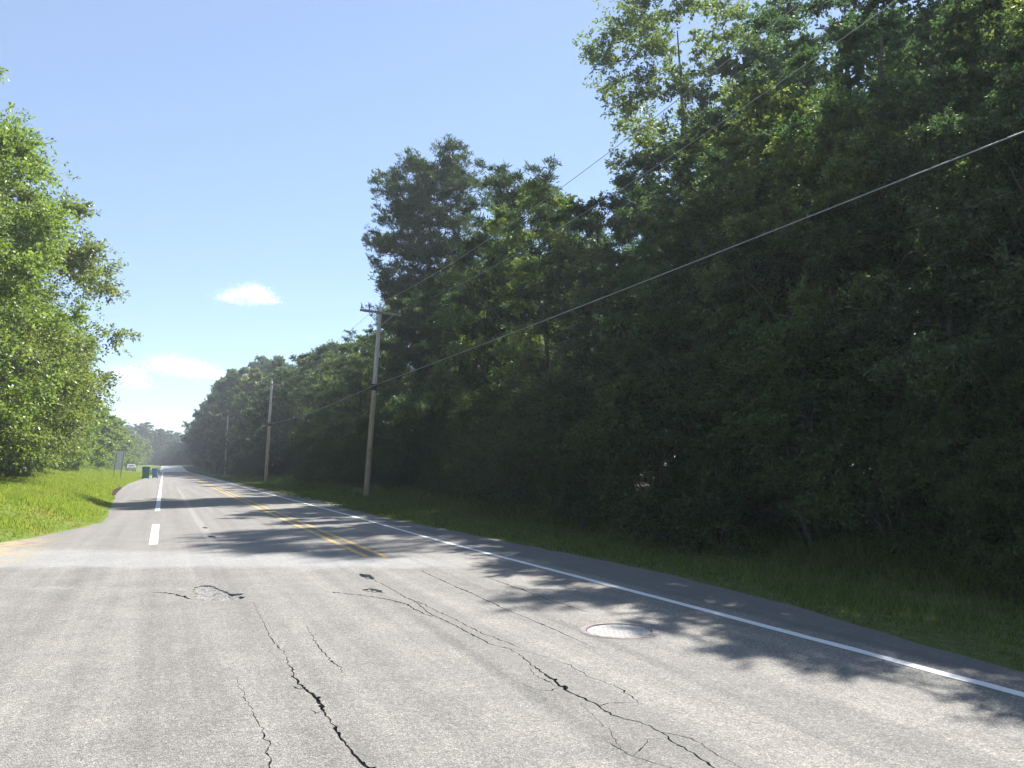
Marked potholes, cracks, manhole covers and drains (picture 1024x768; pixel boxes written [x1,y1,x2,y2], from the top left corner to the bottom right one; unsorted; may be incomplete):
crack [254,604,376,768]
manhole cover [579,622,659,639]
crack [235,678,272,768]
pothole [192,585,244,602]
crack [325,571,742,768]
